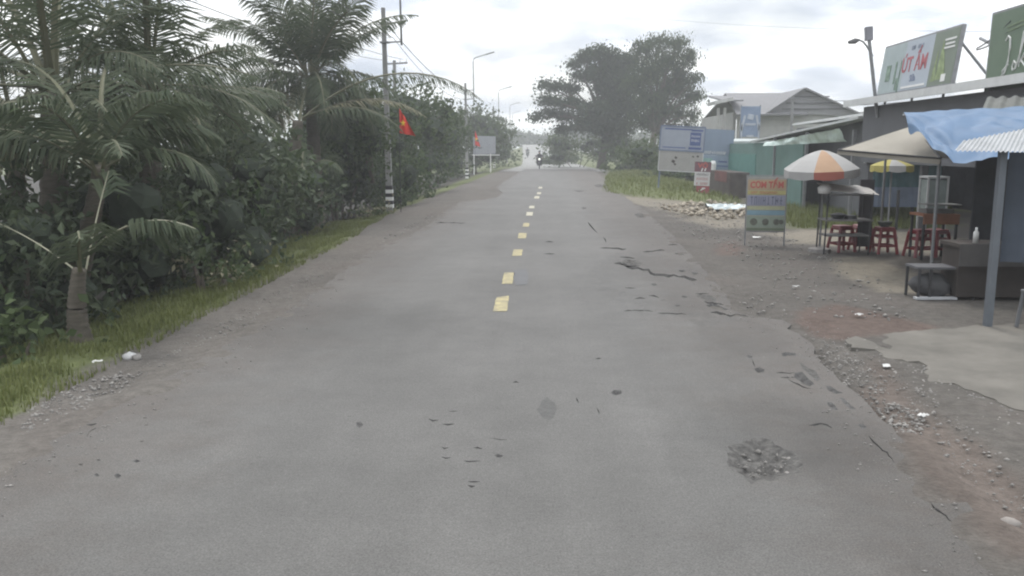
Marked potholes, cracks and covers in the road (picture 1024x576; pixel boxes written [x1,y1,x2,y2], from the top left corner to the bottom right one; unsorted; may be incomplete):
pothole [727,436,803,484]
crack [588,222,748,317]
